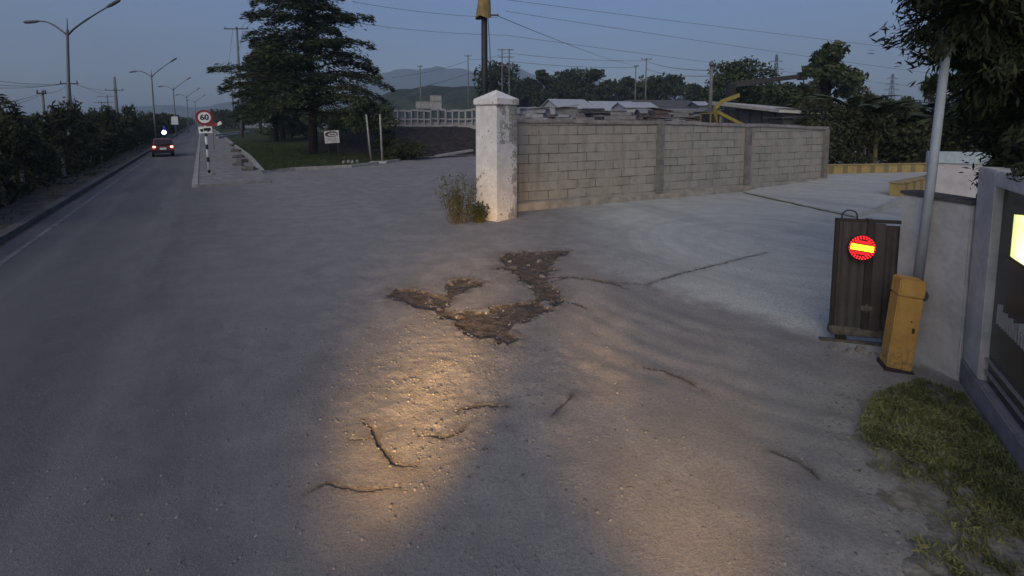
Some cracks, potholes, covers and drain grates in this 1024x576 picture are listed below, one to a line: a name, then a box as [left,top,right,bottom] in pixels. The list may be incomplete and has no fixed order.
crack [308,403,509,494]
crack [770,451,818,479]
crack [551,393,573,416]
pothole [386,251,569,346]
crack [643,367,703,391]
crack [546,276,623,288]
crack [662,255,755,280]
